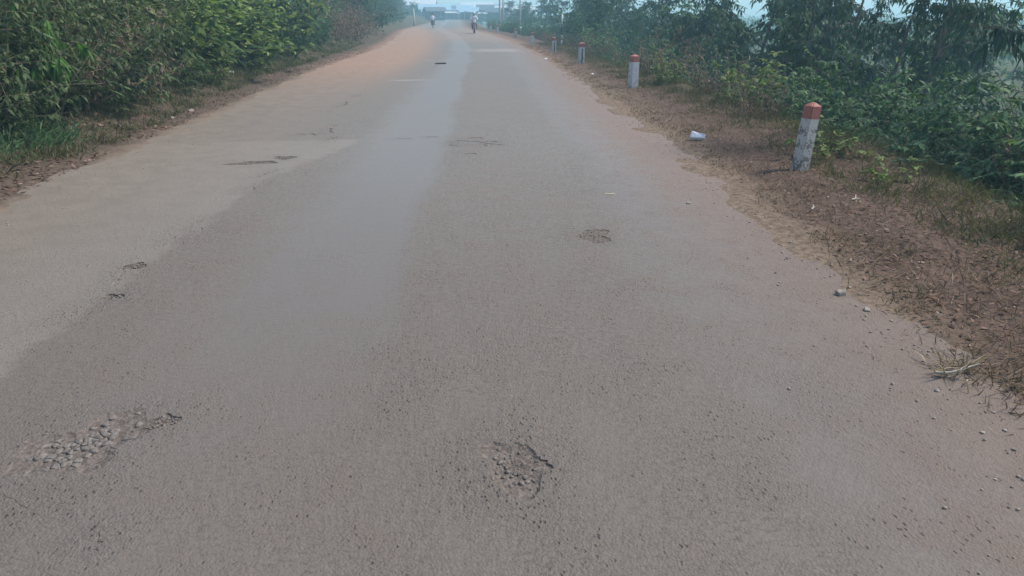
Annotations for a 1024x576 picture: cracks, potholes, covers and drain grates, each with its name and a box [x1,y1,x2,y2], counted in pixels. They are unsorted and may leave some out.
pothole [119,262,147,270]
pothole [478,441,554,502]
pothole [146,413,182,430]
pothole [574,229,611,244]
